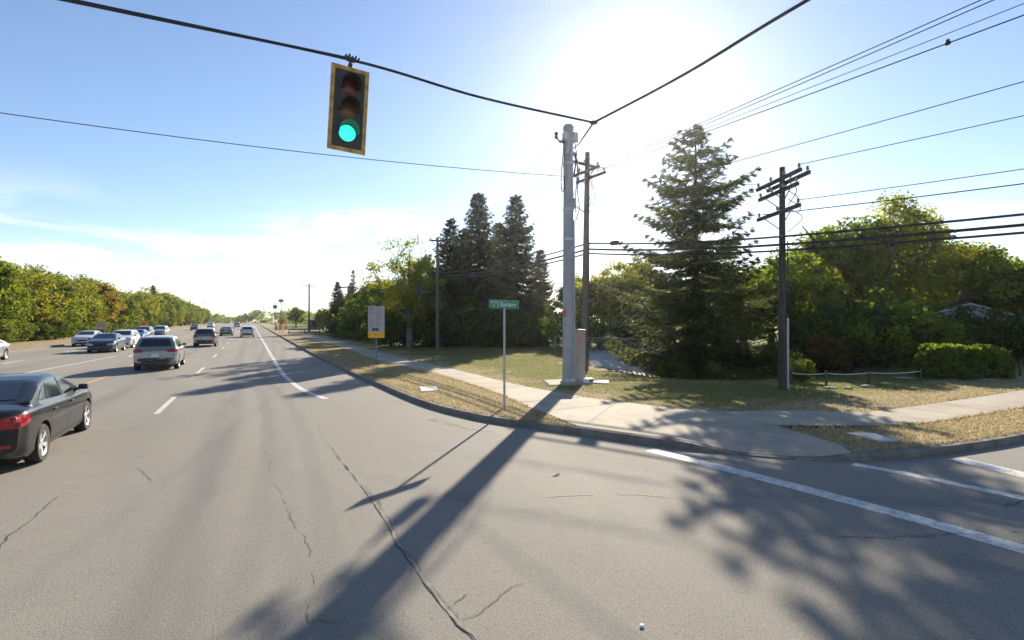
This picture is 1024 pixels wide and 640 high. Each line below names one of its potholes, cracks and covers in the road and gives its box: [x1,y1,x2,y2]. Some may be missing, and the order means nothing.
crack [321,431,525,640]
crack [261,439,344,624]
crack [0,474,95,548]
